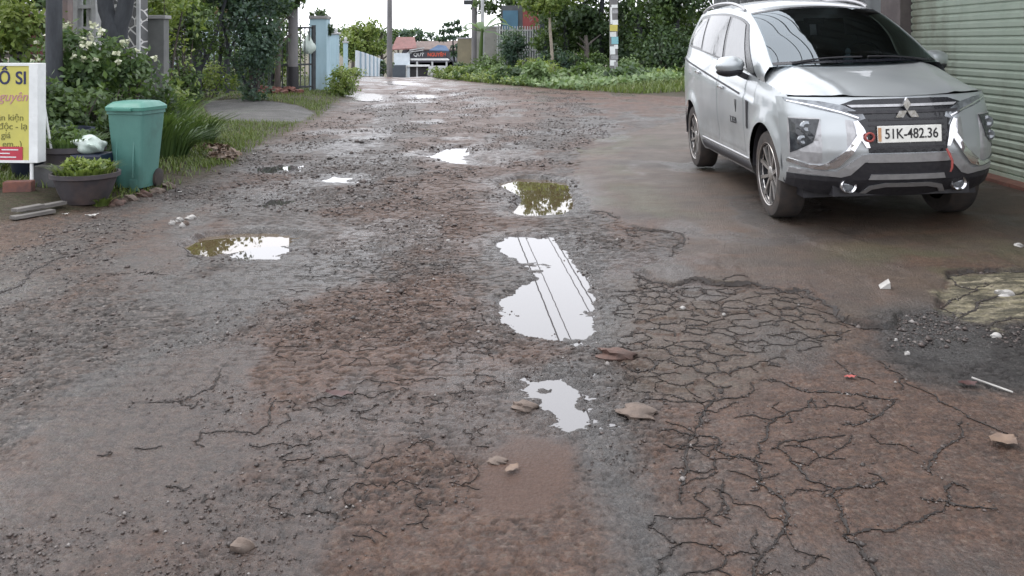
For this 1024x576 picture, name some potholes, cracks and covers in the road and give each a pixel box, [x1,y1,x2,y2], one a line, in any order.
crack [131,368,222,408]
pothole [173,227,325,260]
crack [942,268,1024,328]
crack [166,484,207,503]
pothole [488,232,603,347]
pothole [491,174,584,216]
crack [195,257,505,542]
crack [608,273,1008,576]
